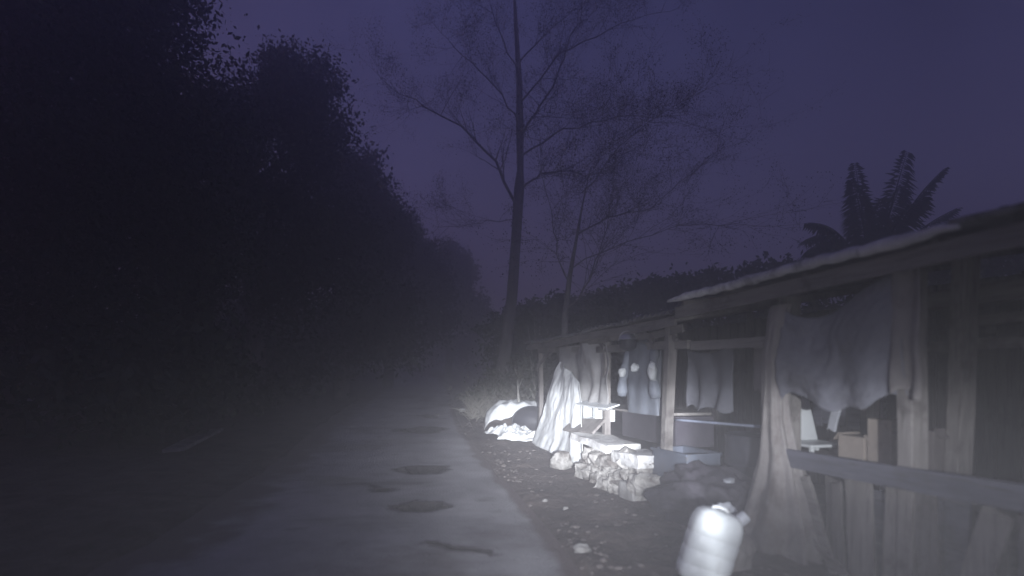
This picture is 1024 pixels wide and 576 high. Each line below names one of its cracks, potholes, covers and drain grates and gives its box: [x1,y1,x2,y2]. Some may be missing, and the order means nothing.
pothole [394,466,448,474]
pothole [393,501,448,512]
